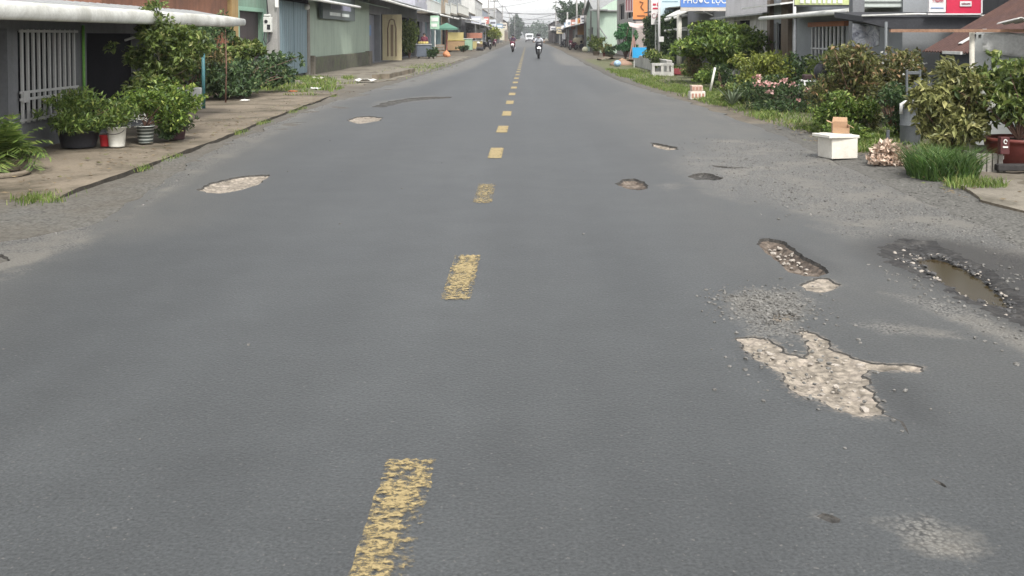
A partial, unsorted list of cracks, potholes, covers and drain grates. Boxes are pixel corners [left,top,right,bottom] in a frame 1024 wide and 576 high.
pothole [373,97,452,108]
pothole [615,178,649,190]
pothole [688,173,723,181]
pothole [650,142,678,150]
pothole [348,116,383,124]
pothole [877,238,1024,327]
pothole [799,278,841,293]
pothole [757,238,829,277]
pothole [196,174,270,193]
pothole [817,513,841,523]
pothole [735,330,924,417]
